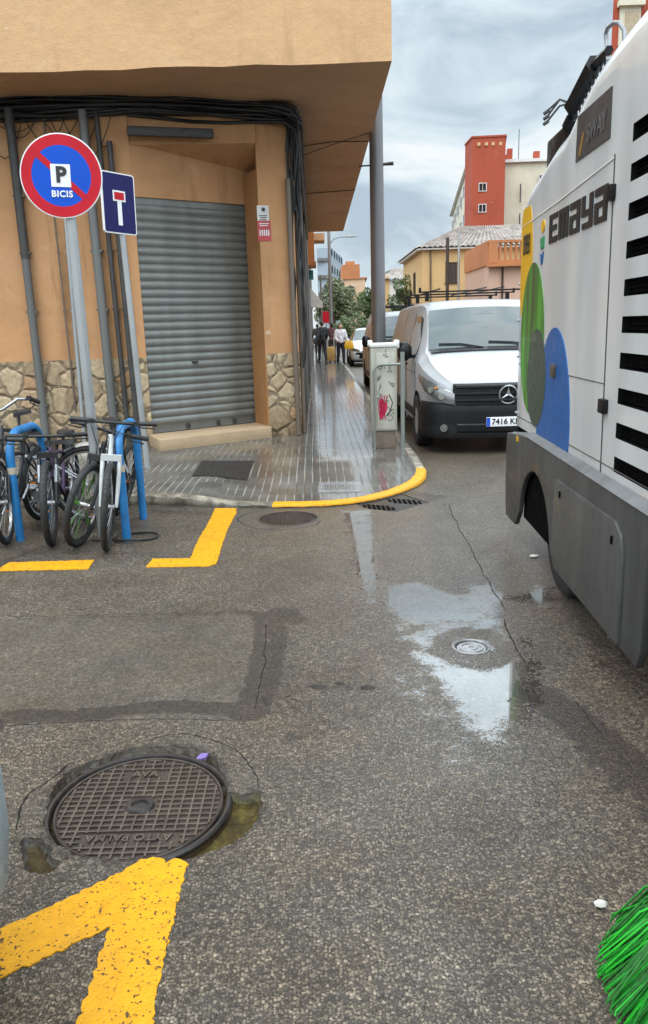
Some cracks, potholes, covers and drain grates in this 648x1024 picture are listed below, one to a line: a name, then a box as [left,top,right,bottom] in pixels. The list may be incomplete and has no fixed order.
manhole cover [257,511,320,526]
manhole cover [44,753,233,862]
crack [449,505,554,671]
crack [16,758,85,830]
drain grate [357,494,429,512]
pothole [19,836,61,874]
crack [139,733,258,784]
